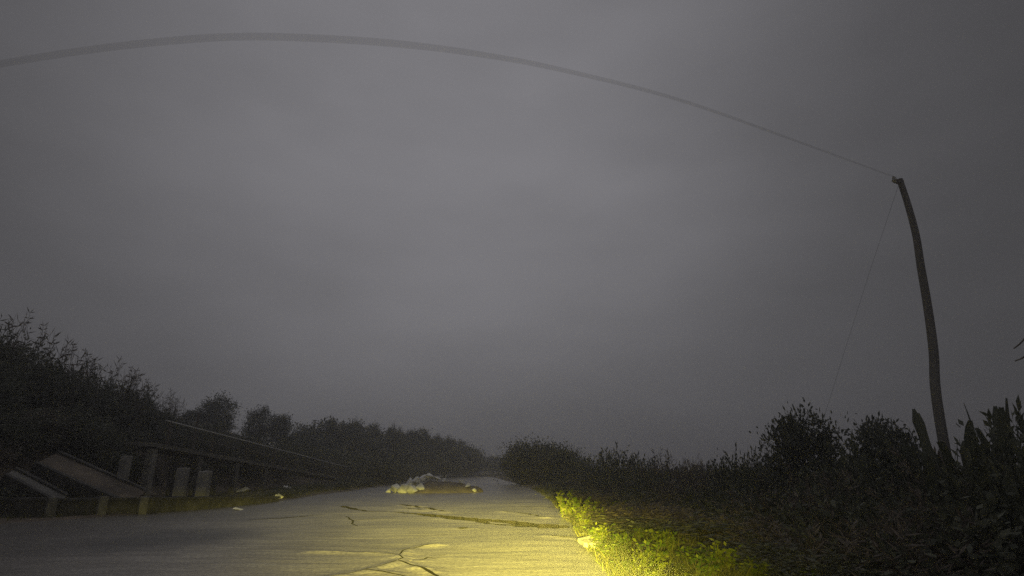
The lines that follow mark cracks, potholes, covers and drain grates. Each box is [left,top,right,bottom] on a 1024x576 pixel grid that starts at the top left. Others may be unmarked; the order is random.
crack [330,504,578,576]
